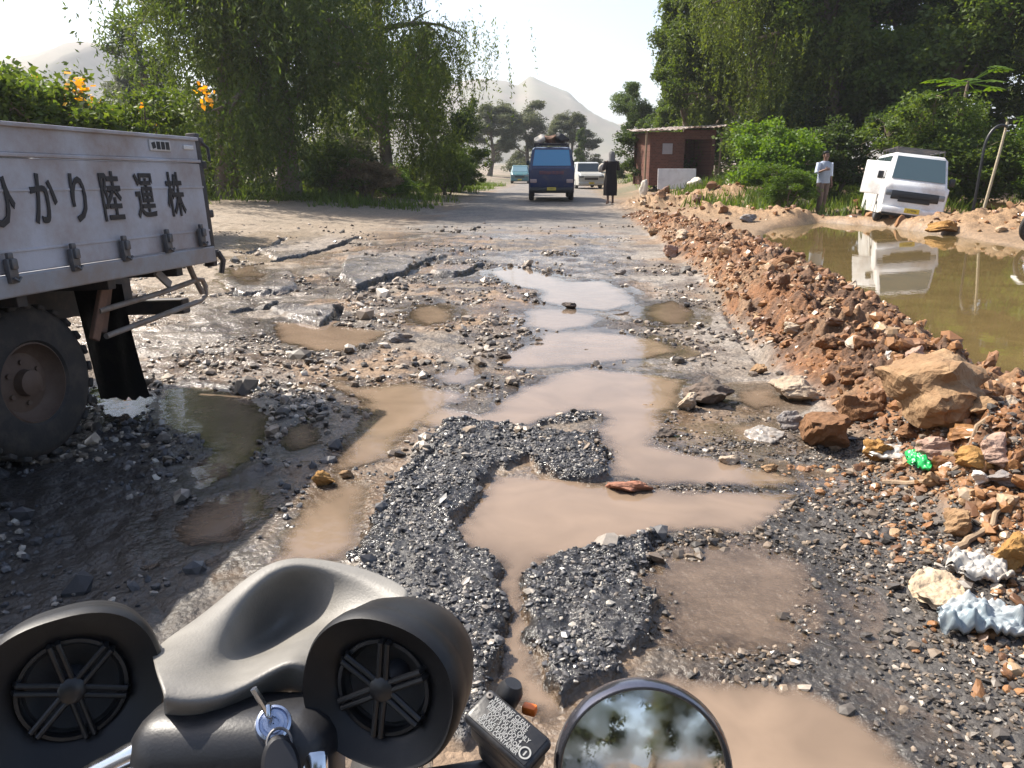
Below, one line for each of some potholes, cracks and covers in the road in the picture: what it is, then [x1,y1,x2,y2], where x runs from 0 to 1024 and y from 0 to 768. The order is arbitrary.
pothole [157,386,271,487]
pothole [330,383,467,472]
pothole [272,320,387,352]
crack [242,236,485,326]
pothole [412,303,472,326]
pothole [175,488,275,546]
pothole [663,679,910,768]
pothole [490,267,635,314]
pothole [461,474,789,722]
pothole [421,368,794,489]
pothole [637,531,824,661]
pothole [629,300,693,326]
